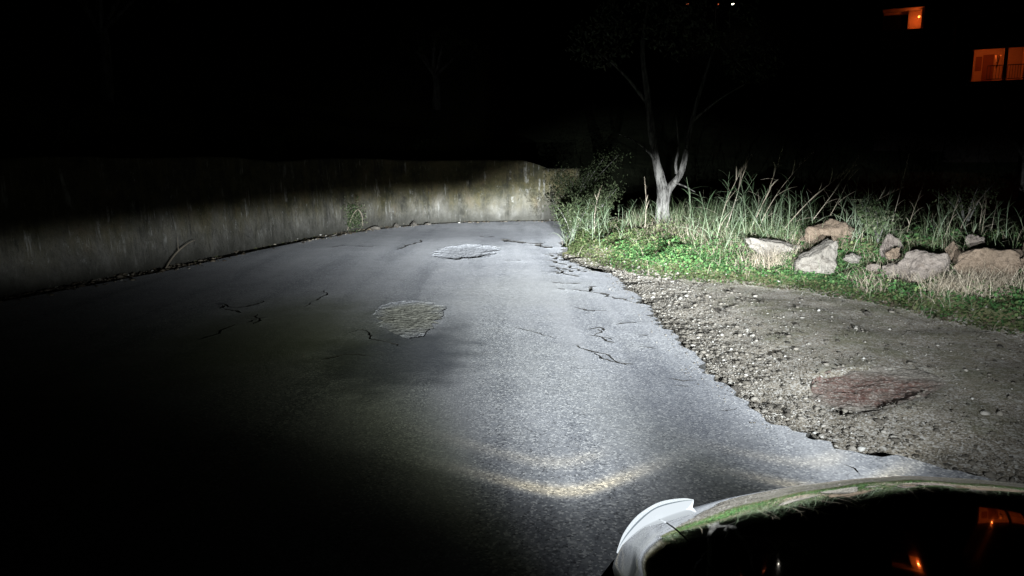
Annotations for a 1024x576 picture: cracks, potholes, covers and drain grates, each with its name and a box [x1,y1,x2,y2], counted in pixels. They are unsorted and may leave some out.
crack [198,301,265,340]
crack [324,329,402,359]
crack [501,239,656,369]
